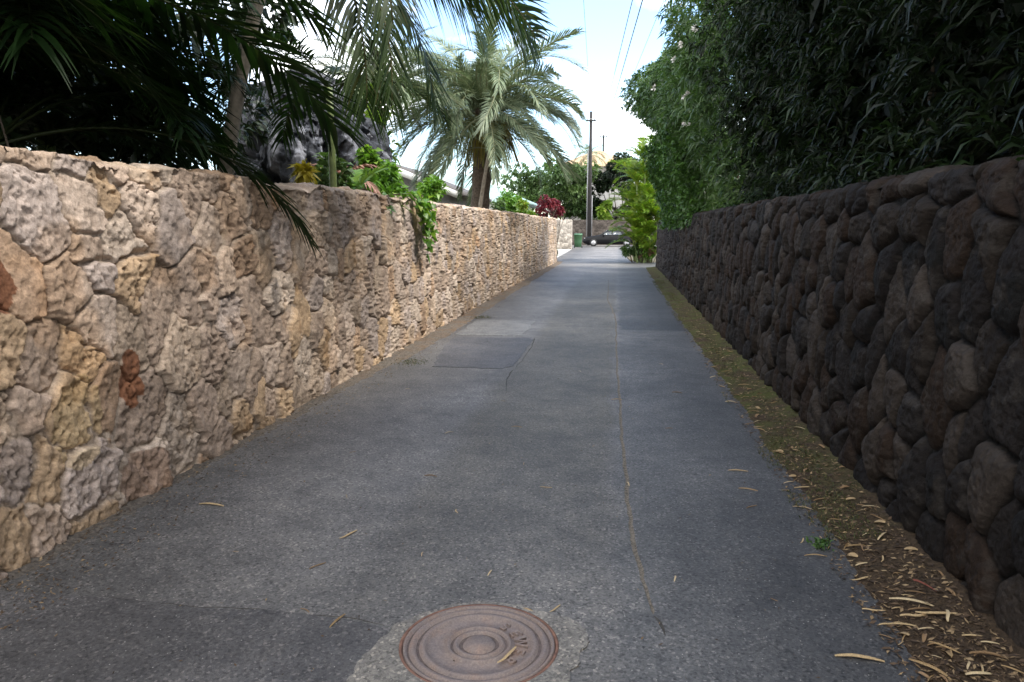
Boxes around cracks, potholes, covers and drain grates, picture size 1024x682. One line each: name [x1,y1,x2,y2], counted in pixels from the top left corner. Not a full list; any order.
manhole cover [399,604,559,682]
crack [105,596,385,626]
